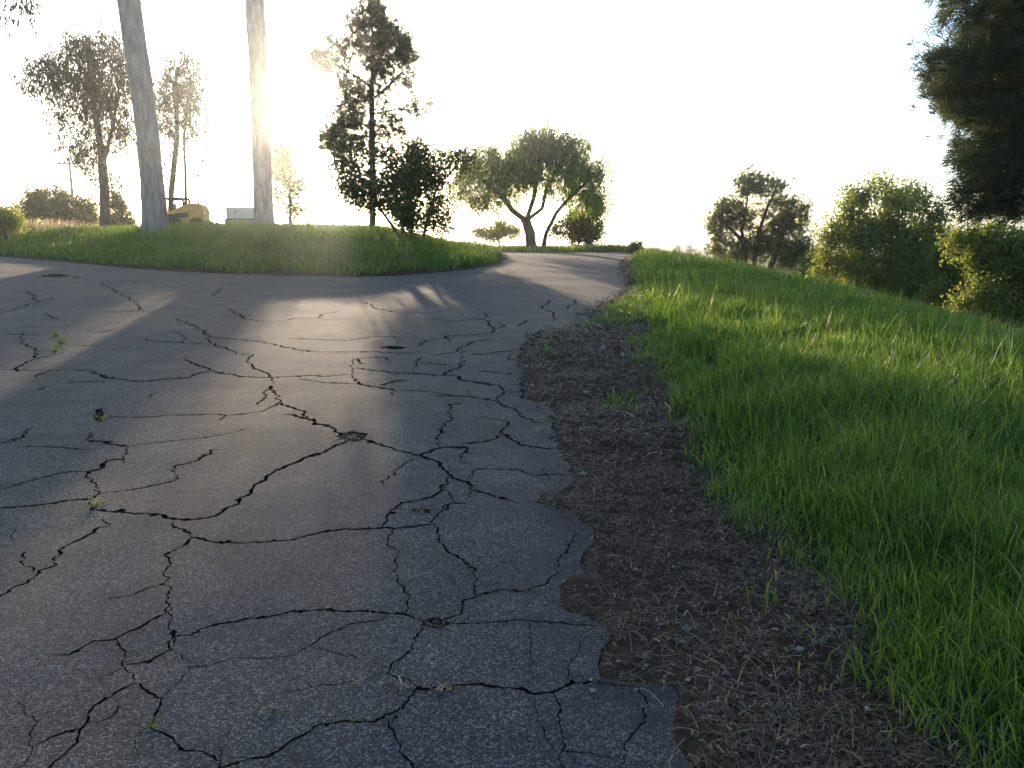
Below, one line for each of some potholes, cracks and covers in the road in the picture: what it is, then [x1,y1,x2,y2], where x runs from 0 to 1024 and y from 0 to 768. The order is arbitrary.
pothole [336,431,367,442]
pothole [421,617,449,630]
crack [73,276,183,346]
crack [0,292,649,768]
